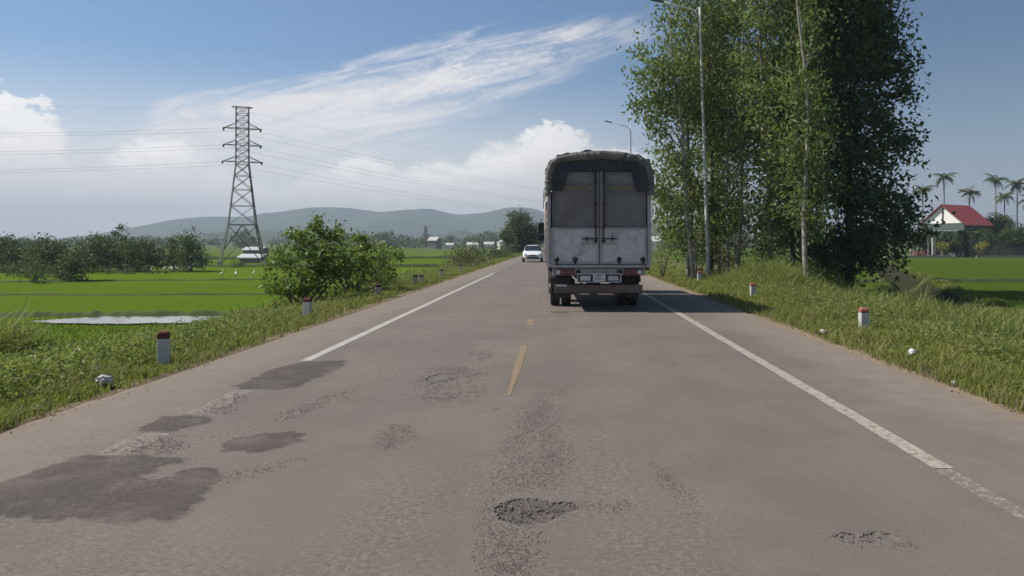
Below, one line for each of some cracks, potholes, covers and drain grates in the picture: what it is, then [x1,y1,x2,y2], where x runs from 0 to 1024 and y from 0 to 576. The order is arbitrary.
pothole [485,495,591,529]
pothole [822,528,911,548]
pothole [420,373,472,386]
crack [480,385,575,500]
crack [645,459,704,521]
